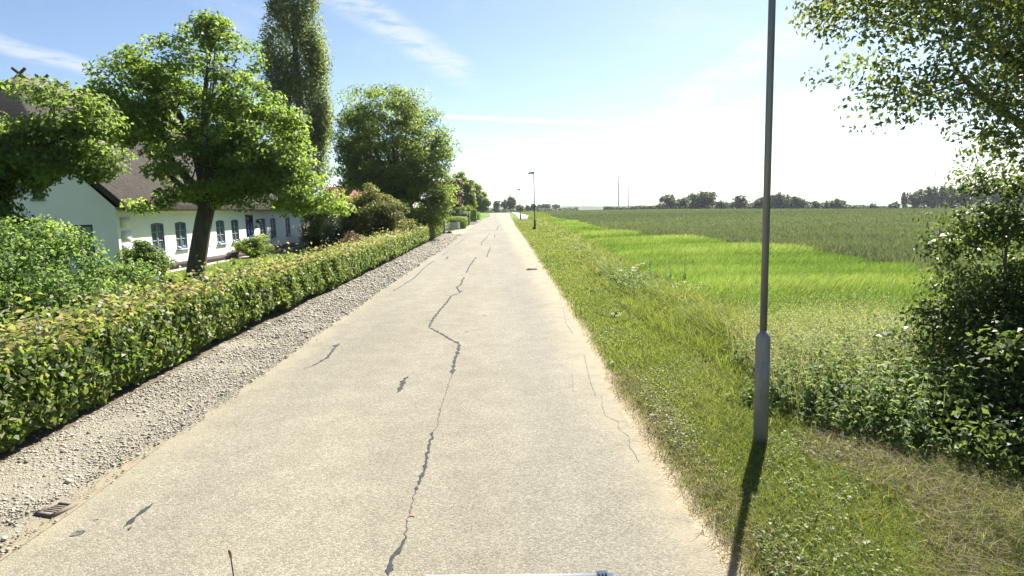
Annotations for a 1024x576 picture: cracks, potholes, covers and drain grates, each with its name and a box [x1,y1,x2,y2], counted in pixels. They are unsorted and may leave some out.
drain grate [34,501,78,518]
crack [404,492,417,535]
